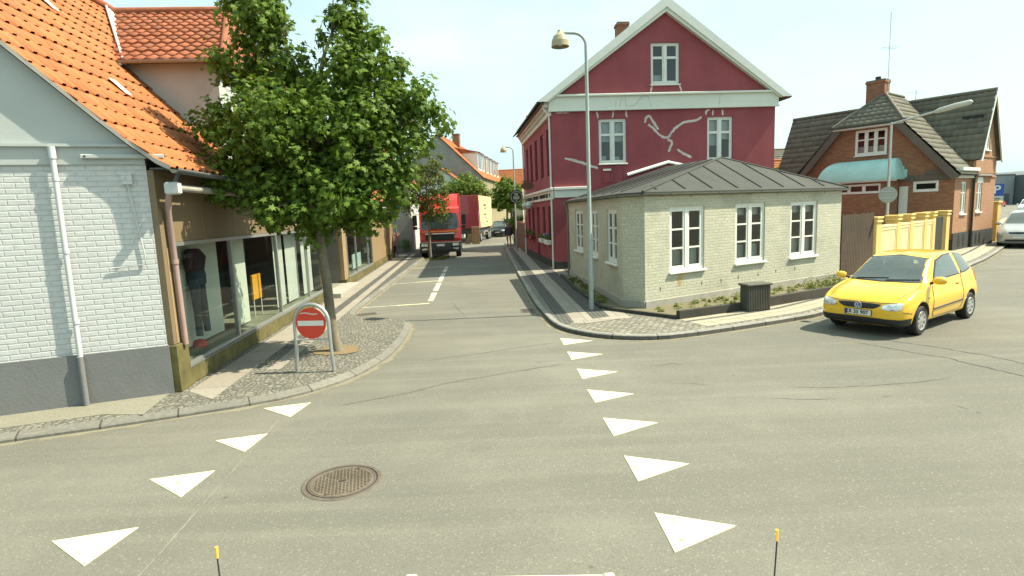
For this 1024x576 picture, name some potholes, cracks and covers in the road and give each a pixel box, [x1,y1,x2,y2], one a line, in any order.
manhole cover [301,464,383,502]
